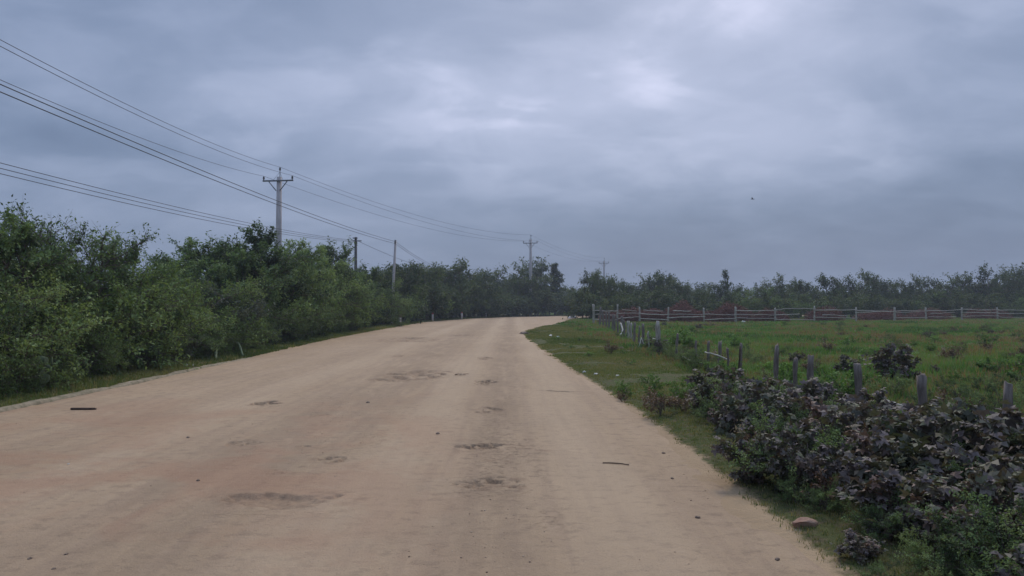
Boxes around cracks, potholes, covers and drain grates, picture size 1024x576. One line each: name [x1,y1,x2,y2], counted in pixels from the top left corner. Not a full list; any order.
pothole [294,453,368,467]
pothole [166,486,388,516]
pothole [229,399,297,408]
pothole [192,438,291,451]
pothole [462,406,513,416]
pothole [468,379,507,387]
pothole [430,440,546,453]
pothole [440,473,535,498]
pothole [366,367,458,382]
